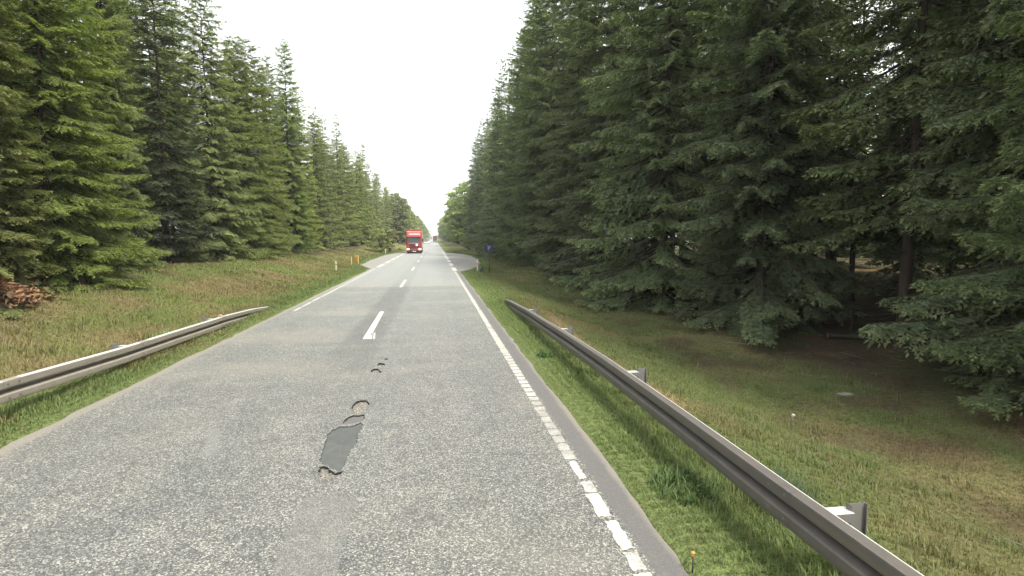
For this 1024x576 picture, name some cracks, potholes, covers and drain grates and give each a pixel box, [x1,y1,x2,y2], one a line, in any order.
pothole [319,423,363,471]
pothole [318,466,343,480]
pothole [343,415,365,424]
pothole [352,400,369,413]
